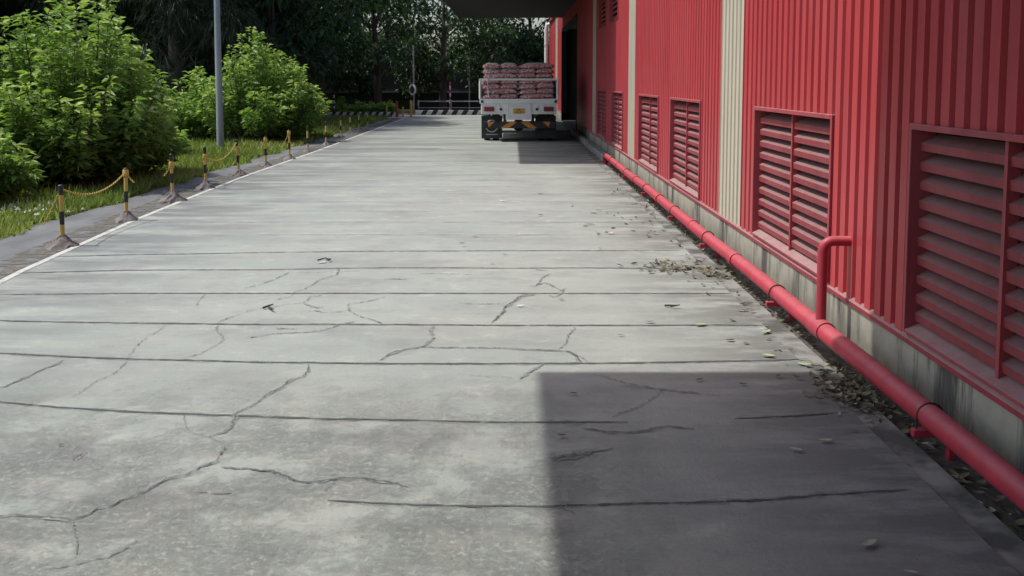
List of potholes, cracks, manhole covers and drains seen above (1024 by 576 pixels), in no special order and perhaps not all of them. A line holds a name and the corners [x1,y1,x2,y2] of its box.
crack [381,326,720,461]
crack [181,268,383,358]
crack [0,364,408,567]
crack [460,269,564,321]
